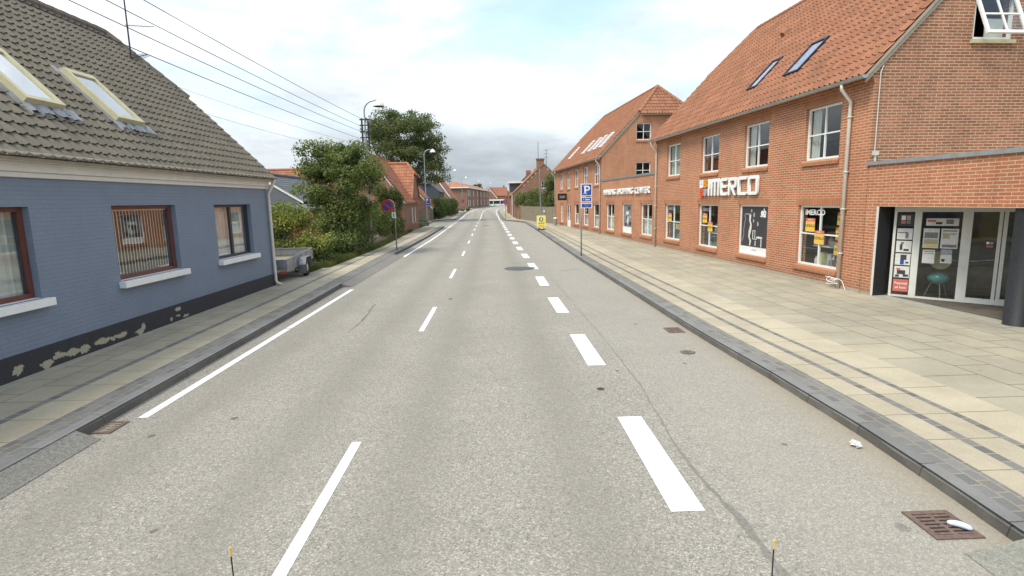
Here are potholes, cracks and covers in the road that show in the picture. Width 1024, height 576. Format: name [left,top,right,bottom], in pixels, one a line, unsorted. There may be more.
drain grate [87,421,130,434]
drain grate [901,510,986,540]
